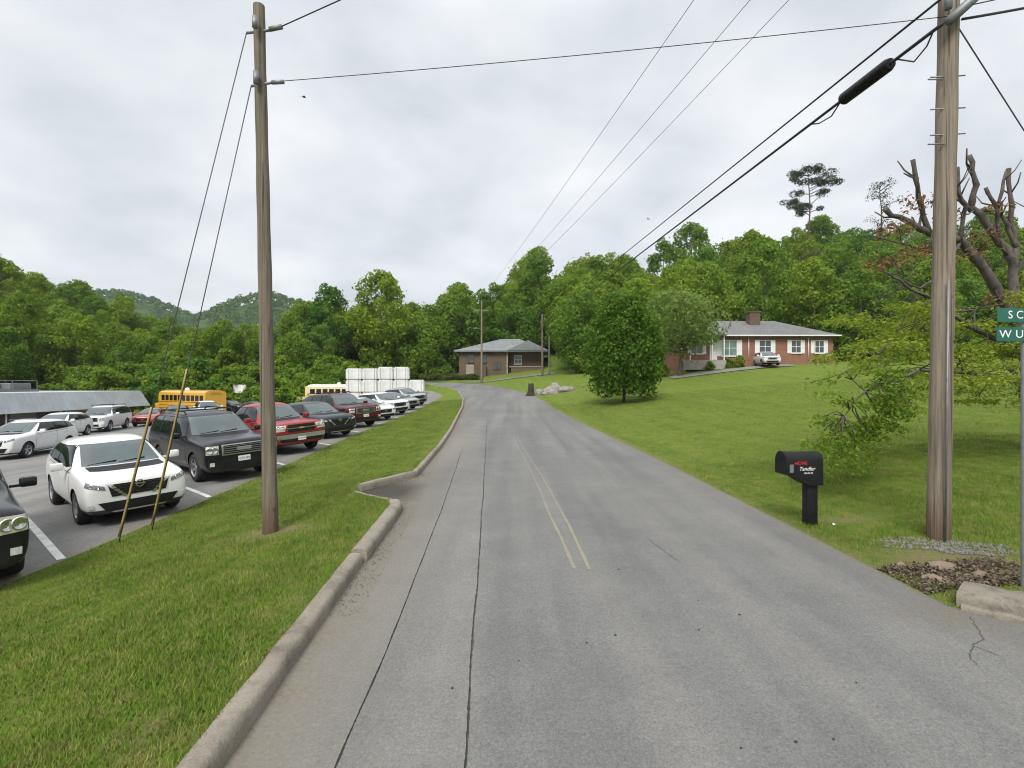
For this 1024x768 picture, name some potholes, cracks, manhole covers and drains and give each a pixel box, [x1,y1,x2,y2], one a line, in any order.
crack [969,616,995,664]
